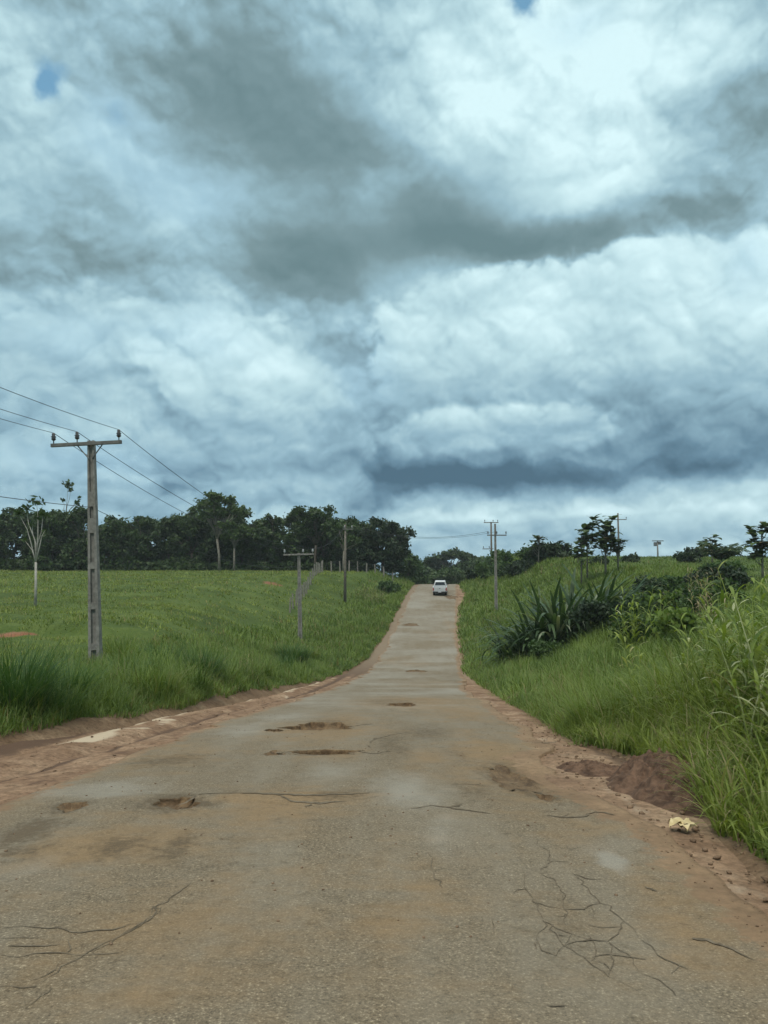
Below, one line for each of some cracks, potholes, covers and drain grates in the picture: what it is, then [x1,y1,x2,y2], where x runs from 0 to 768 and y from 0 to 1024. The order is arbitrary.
pothole [258,749,292,757]
pothole [272,721,359,731]
pothole [47,800,98,816]
pothole [482,764,551,794]
crack [417,804,487,813]
pothole [143,795,210,812]
pothole [527,793,565,804]
crack [179,793,371,806]
crack [514,842,754,995]
crack [0,883,190,1007]
